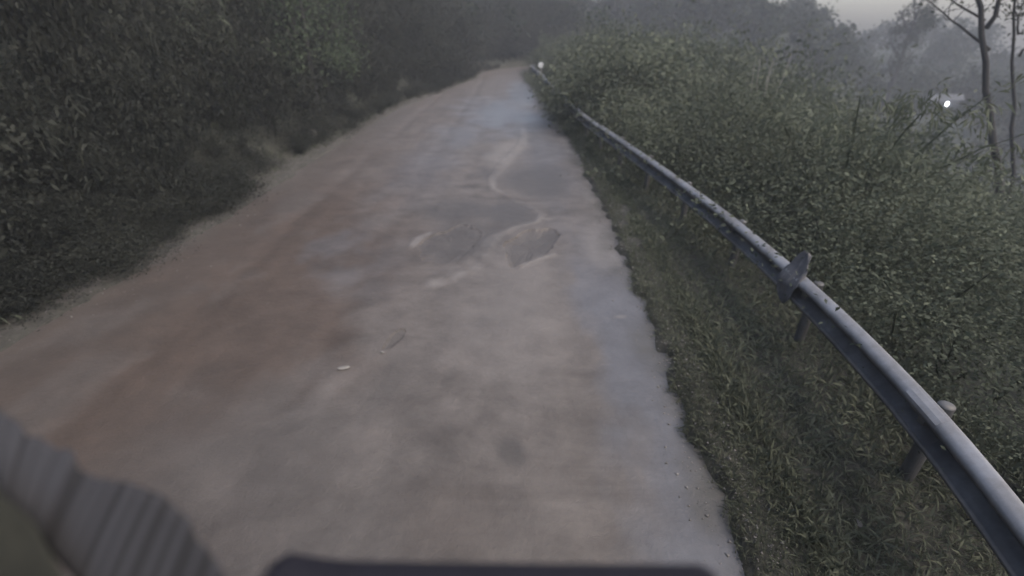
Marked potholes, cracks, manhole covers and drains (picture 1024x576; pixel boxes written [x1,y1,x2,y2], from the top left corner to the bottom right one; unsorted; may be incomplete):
pothole [413,223,486,267]
pothole [376,324,412,355]
pothole [497,226,564,271]
